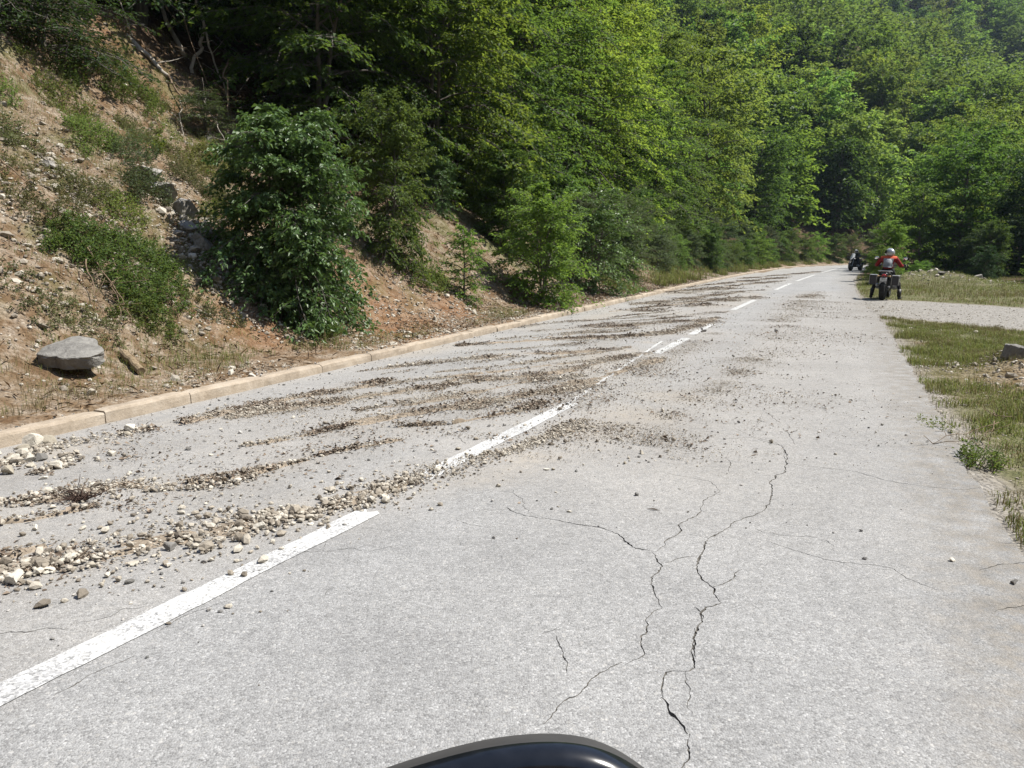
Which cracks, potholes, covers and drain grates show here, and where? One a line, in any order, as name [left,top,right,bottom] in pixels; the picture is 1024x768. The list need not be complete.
crack [56,603,219,694]
crack [499,392,974,768]
crack [0,607,141,634]
